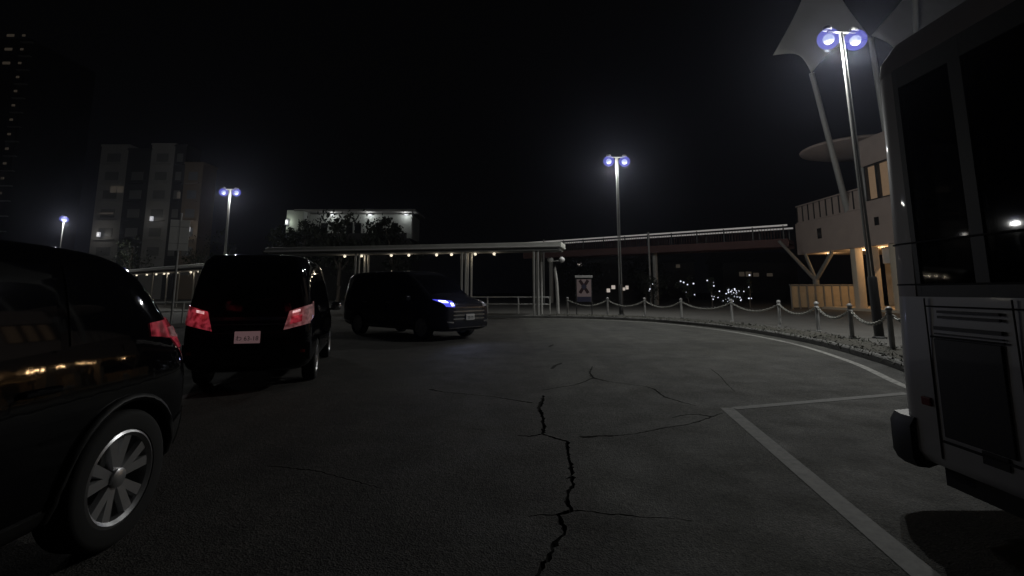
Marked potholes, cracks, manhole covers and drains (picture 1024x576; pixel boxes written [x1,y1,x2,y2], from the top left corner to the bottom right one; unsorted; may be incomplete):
crack [429,345,723,576]
